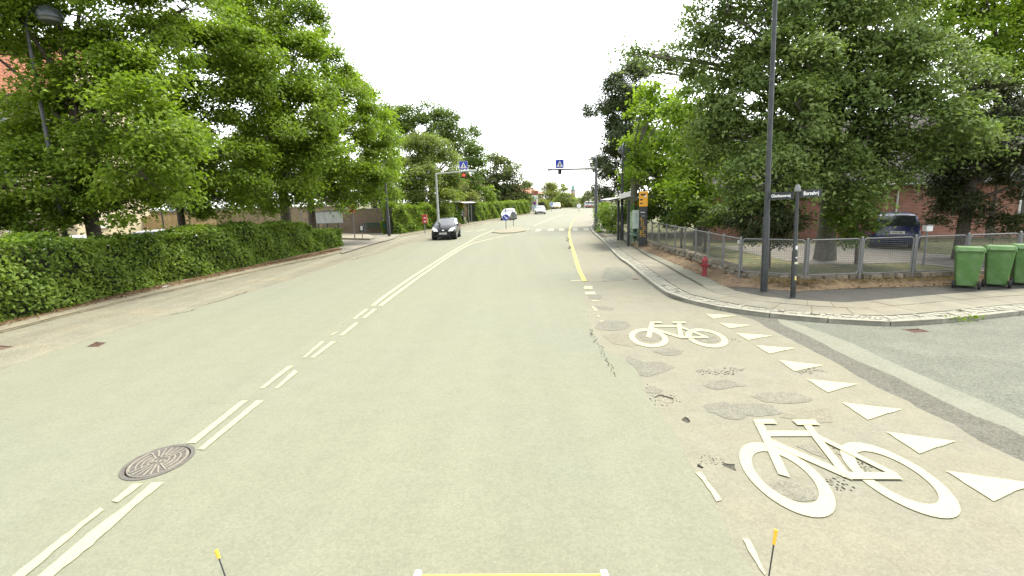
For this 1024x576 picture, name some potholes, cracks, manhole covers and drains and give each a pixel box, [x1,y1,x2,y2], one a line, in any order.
manhole cover [119,444,195,481]
pothole [649,394,680,406]
